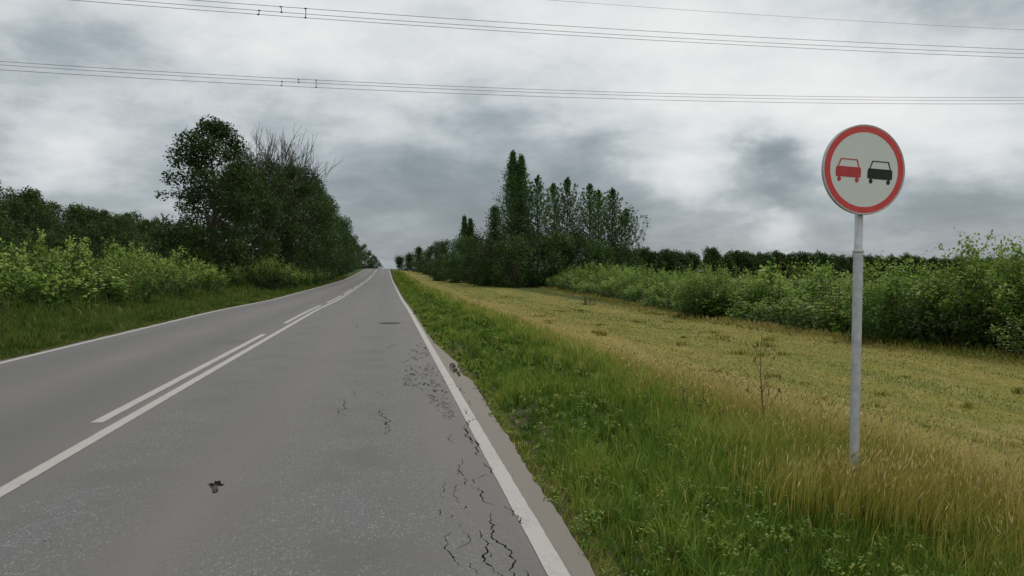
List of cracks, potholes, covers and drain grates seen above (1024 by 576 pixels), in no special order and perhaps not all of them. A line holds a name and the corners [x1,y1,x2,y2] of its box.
crack [444,522,529,576]
crack [392,345,492,509]
